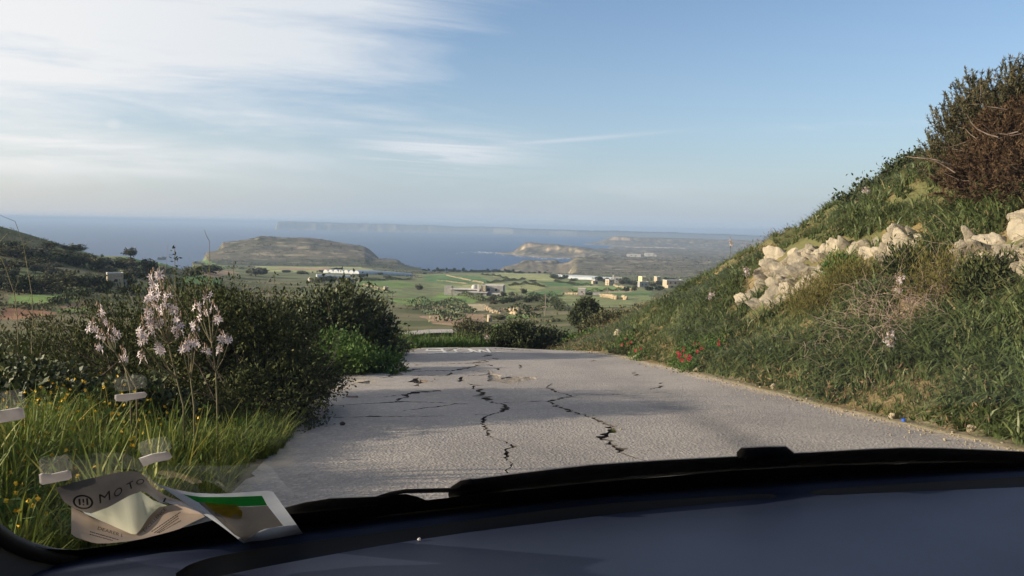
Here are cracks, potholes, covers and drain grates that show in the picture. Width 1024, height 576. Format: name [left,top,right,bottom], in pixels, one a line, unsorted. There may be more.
crack [333,347,675,473]
pothole [487,371,536,384]
